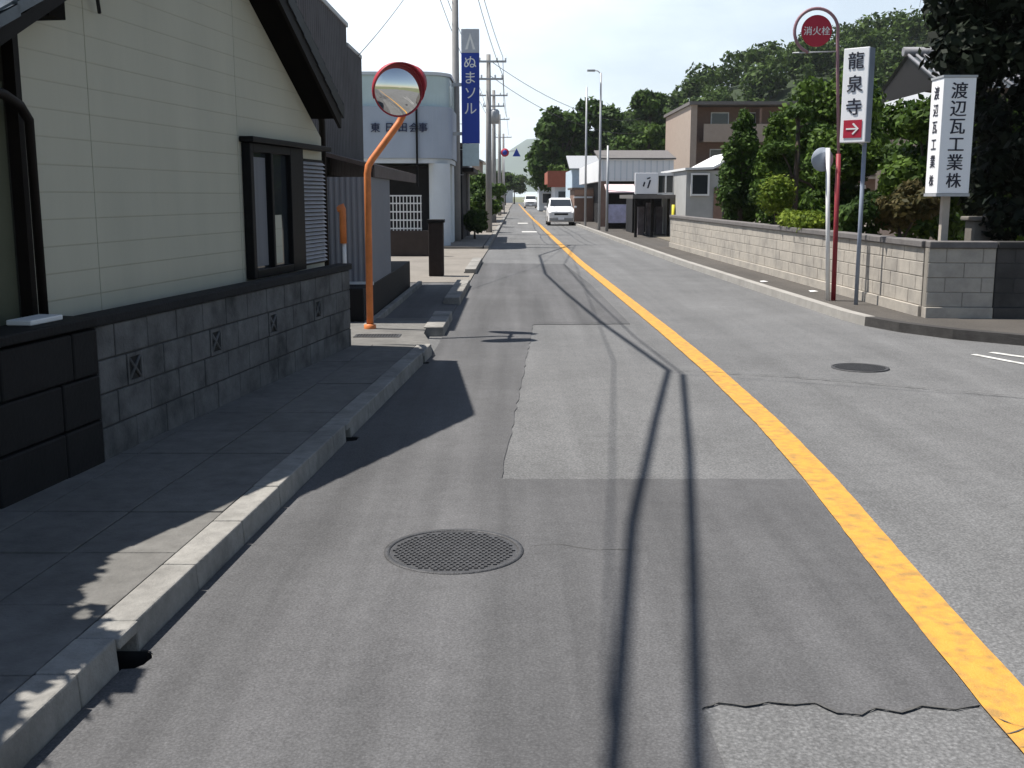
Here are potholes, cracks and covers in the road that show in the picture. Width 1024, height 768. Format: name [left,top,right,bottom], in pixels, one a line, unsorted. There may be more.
manhole cover [384,529,524,575]
manhole cover [831,363,890,373]
crack [704,701,980,715]
